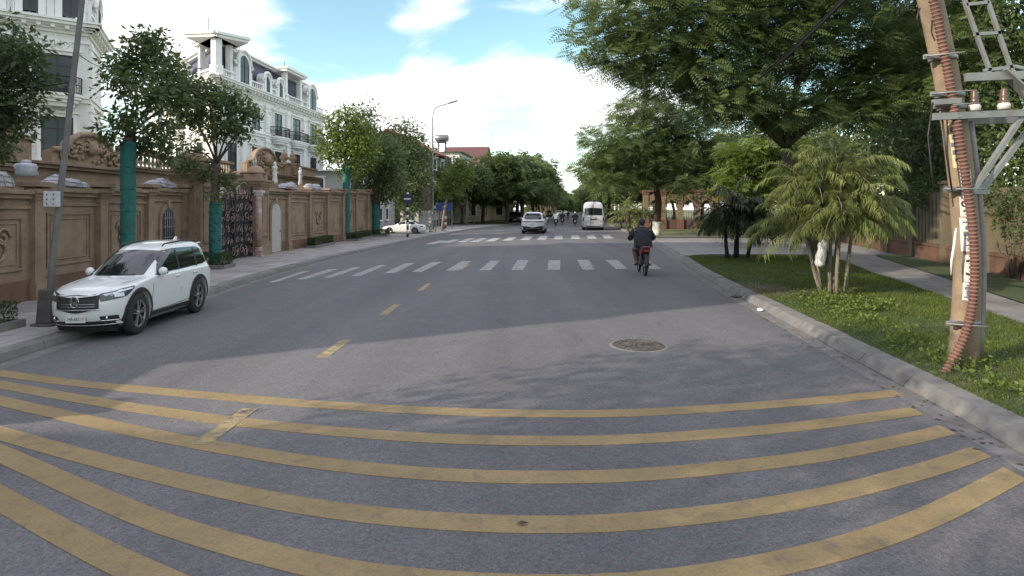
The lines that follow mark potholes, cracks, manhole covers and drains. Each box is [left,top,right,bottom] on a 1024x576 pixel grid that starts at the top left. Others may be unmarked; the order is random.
manhole cover [609,339,669,352]
